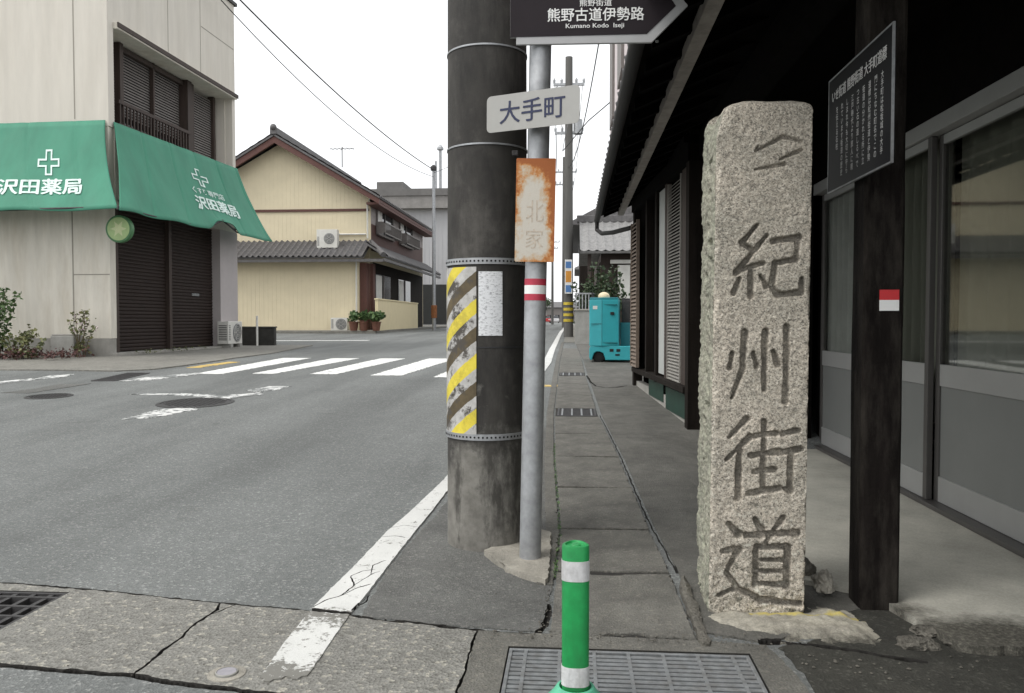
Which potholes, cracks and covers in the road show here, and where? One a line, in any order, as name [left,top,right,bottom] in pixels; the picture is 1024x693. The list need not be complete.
drain grate [501,648,768,693]
crack [542,610,551,632]
drain grate [557,408,597,417]
drain grate [0,591,67,629]
manhole cover [155,398,235,408]
